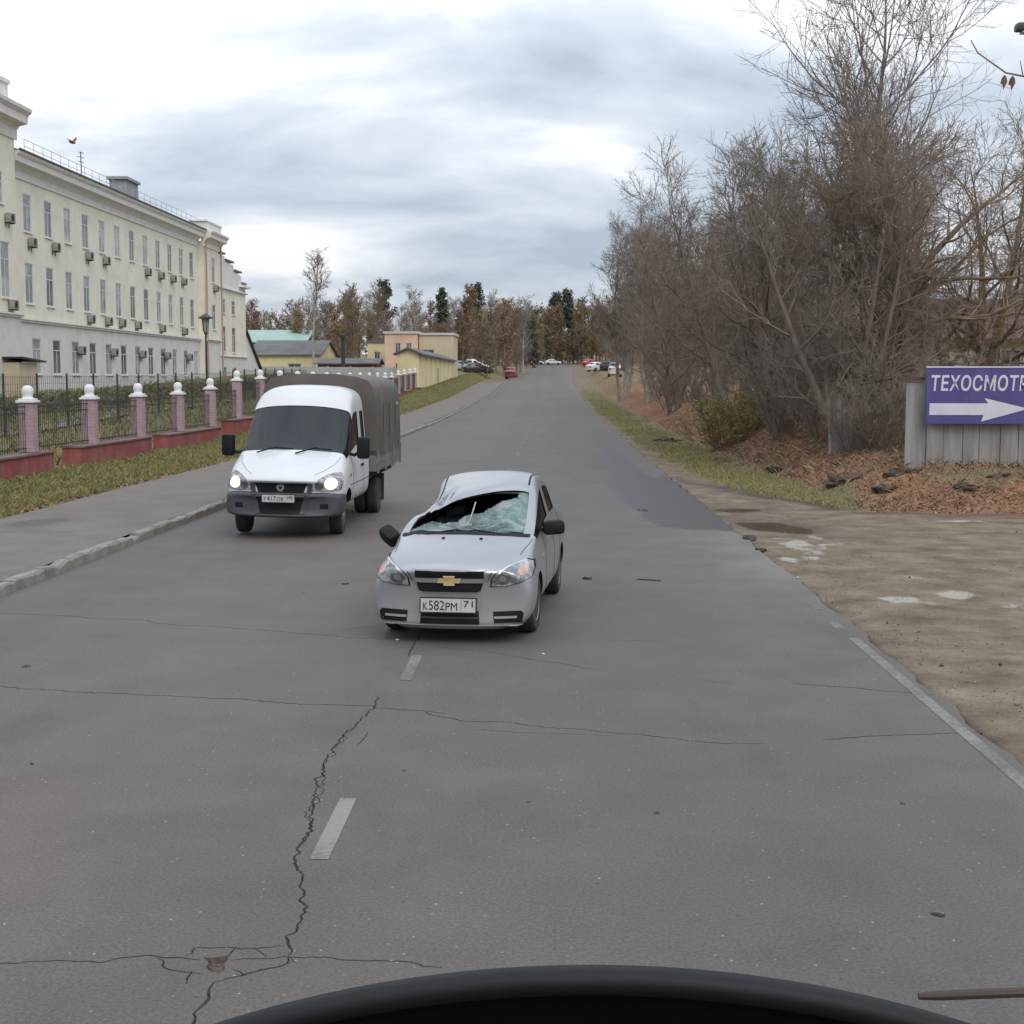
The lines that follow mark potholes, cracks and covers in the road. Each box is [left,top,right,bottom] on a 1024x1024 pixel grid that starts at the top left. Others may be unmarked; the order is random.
crack [823,732,982,740]
crack [3,613,380,640]
pothole [203,956,228,973]
crack [0,686,761,1024]
